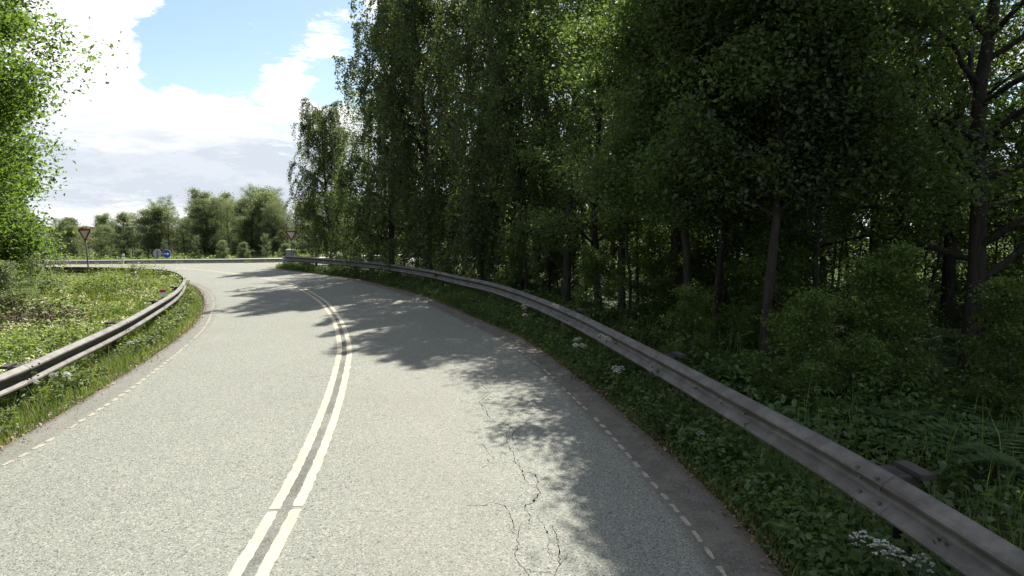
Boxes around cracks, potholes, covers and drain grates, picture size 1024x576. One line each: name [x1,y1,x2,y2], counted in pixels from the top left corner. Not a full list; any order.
crack [438,341,567,576]
